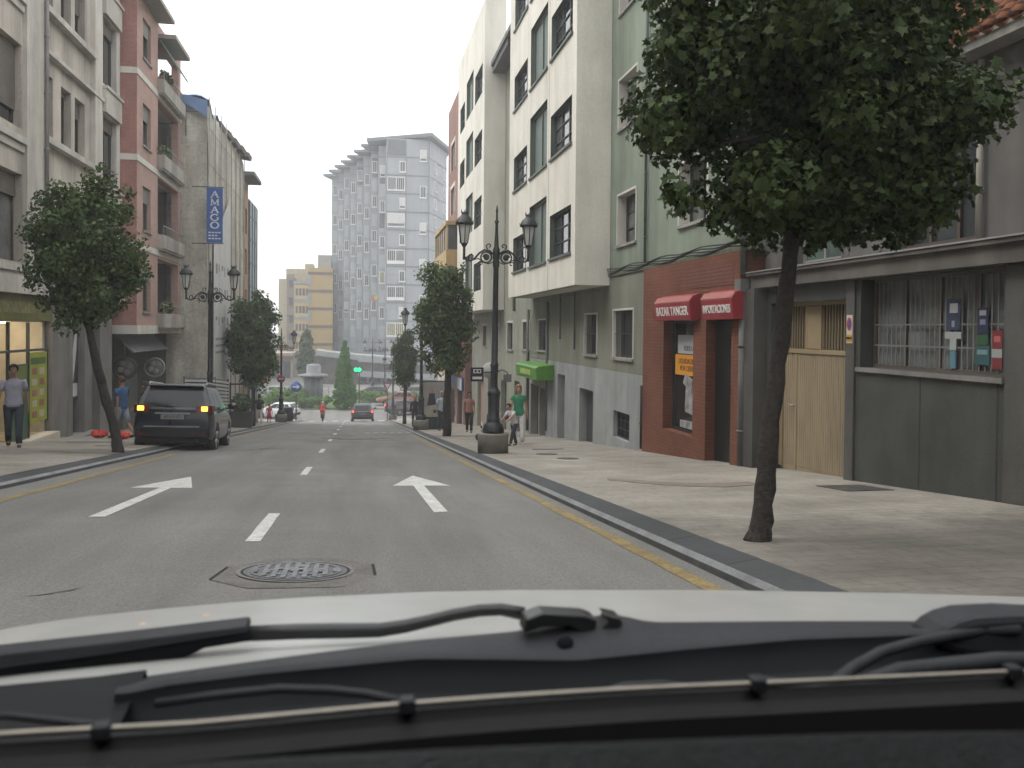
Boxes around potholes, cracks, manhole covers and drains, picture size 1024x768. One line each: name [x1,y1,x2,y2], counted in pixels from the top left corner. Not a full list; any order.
manhole cover [209,558,377,588]
